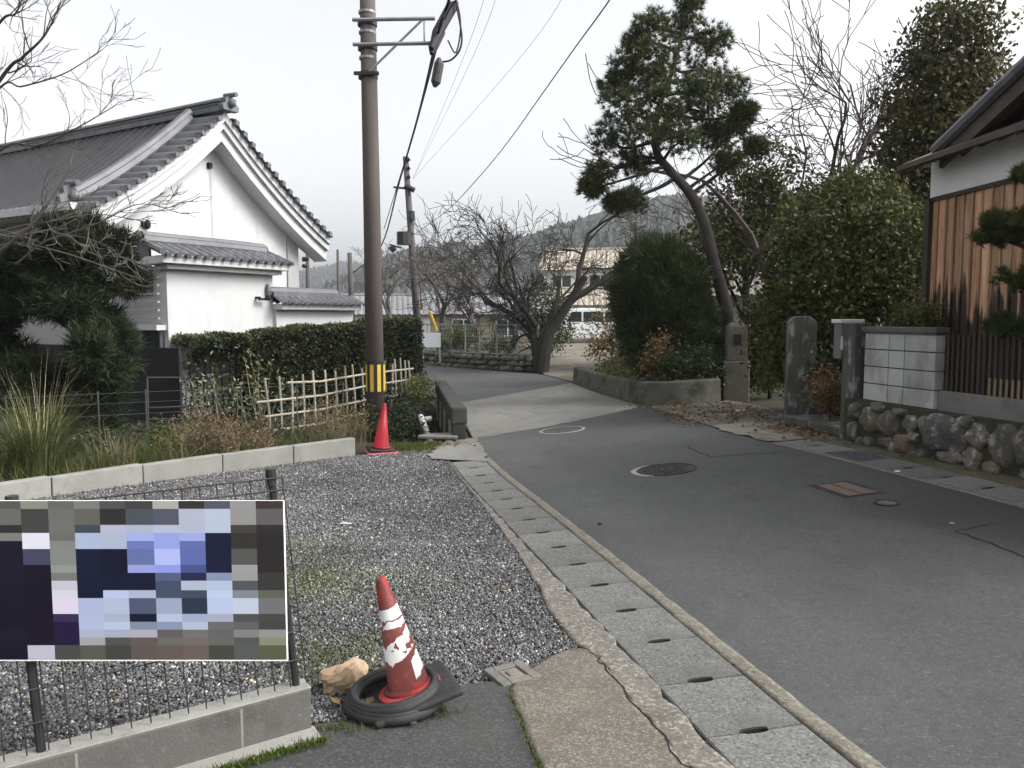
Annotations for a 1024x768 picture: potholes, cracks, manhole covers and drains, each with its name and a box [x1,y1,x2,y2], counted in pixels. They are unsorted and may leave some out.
manhole cover [631,463,697,476]
manhole cover [539,426,585,434]
drain grate [824,449,891,462]
utility cover [808,480,887,498]
